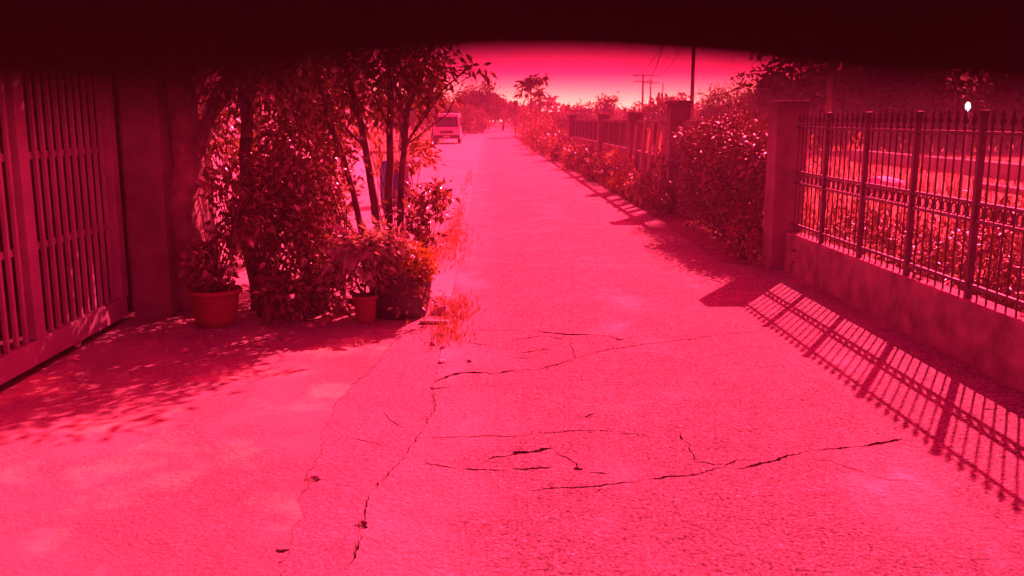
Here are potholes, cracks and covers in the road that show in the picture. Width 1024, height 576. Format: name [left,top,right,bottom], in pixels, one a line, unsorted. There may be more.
crack [467,436,899,489]
crack [431,332,576,390]
